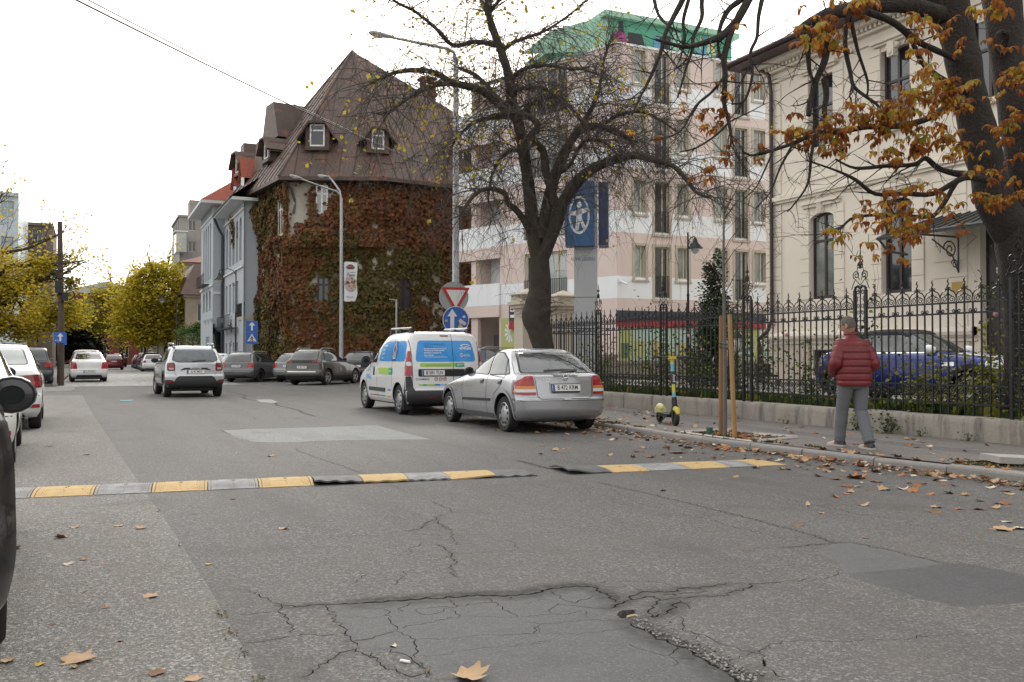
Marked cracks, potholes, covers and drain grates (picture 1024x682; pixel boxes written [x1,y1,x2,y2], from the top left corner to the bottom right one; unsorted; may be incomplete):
crack [308,489,533,577]
crack [210,568,967,682]
pothole [617,610,637,619]
